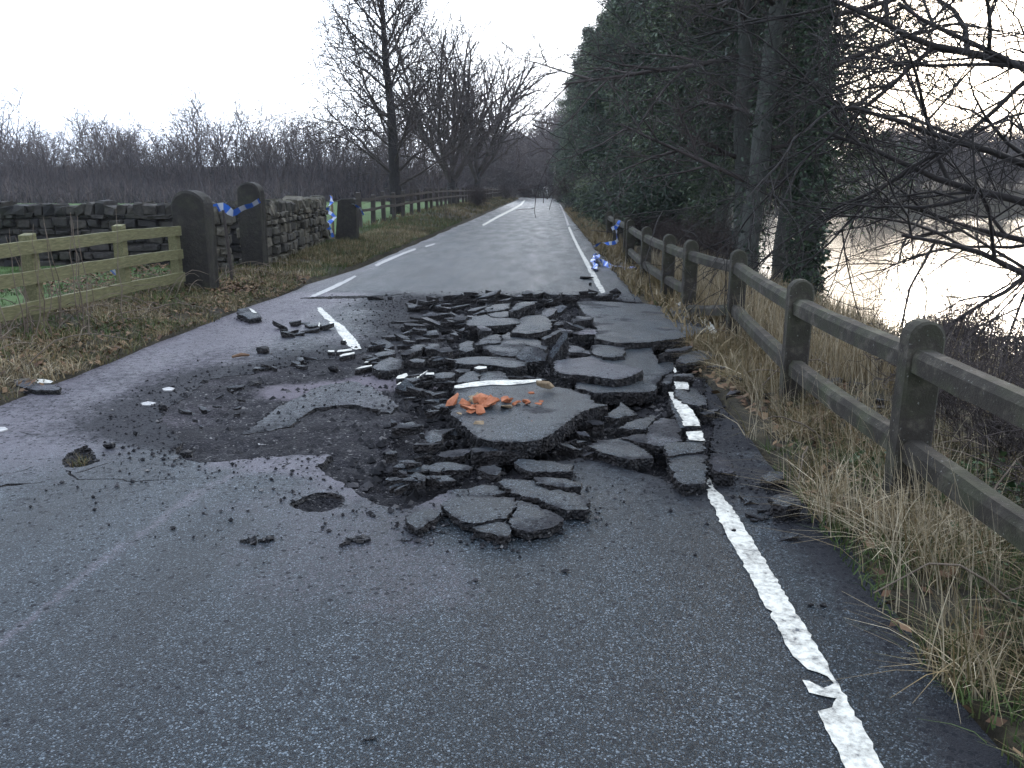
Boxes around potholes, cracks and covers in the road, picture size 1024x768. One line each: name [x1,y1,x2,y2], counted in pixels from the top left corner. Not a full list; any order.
pothole [157,295,718,509]
pothole [62,445,100,468]
crack [0,466,41,487]
crack [67,462,199,482]
